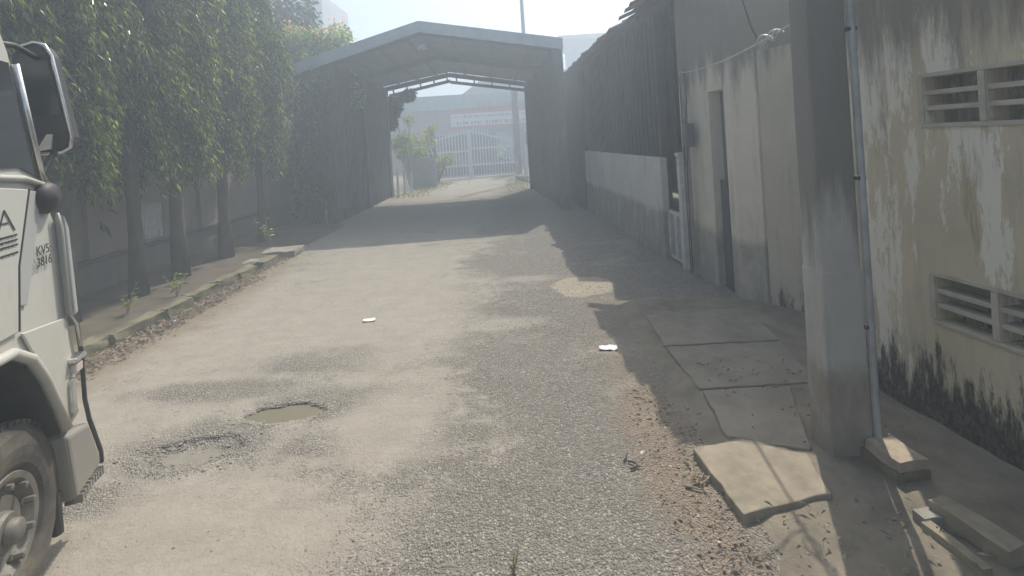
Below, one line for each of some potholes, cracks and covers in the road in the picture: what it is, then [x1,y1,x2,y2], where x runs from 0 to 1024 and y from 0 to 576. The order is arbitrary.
pothole [112,419,297,483]
pothole [227,399,342,428]
